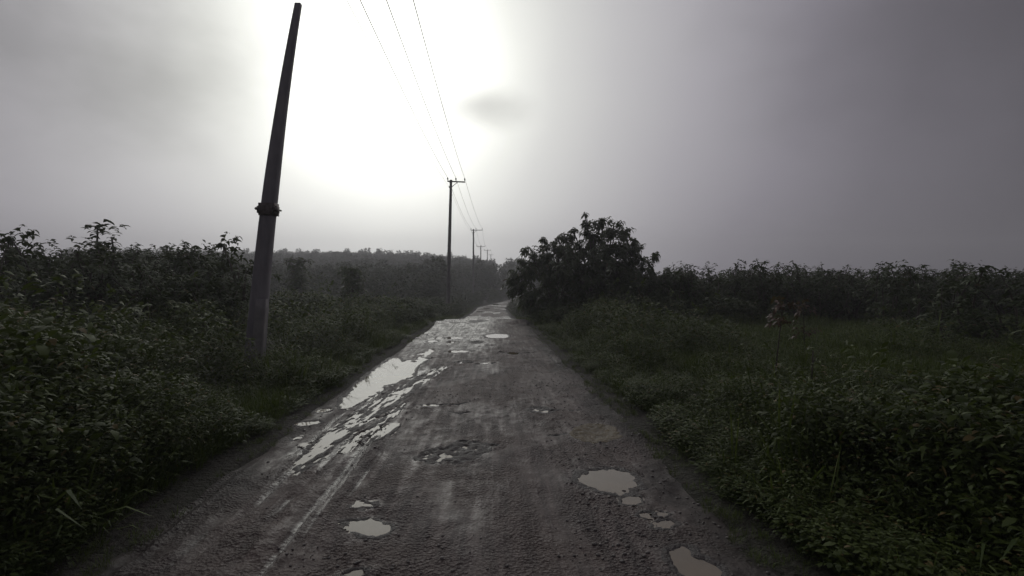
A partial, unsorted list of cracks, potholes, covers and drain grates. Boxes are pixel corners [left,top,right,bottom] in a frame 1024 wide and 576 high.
pothole [661,543,729,576]
pothole [634,509,656,520]
pothole [338,517,396,540]
pothole [290,366,447,475]
pothole [334,357,432,410]
pothole [524,406,557,414]
pothole [649,510,672,519]
pothole [348,499,381,511]
pothole [616,495,645,506]
pothole [649,517,682,531]
pothole [569,466,649,498]
pothole [412,439,496,465]
